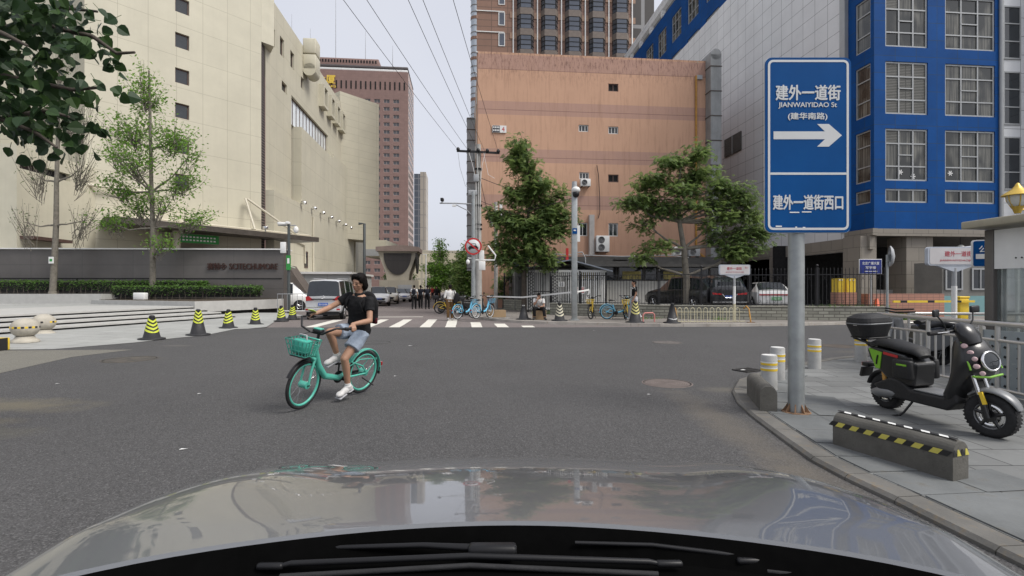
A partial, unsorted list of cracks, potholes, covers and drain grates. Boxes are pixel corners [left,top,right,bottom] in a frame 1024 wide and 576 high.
manhole cover [642,379,693,388]
